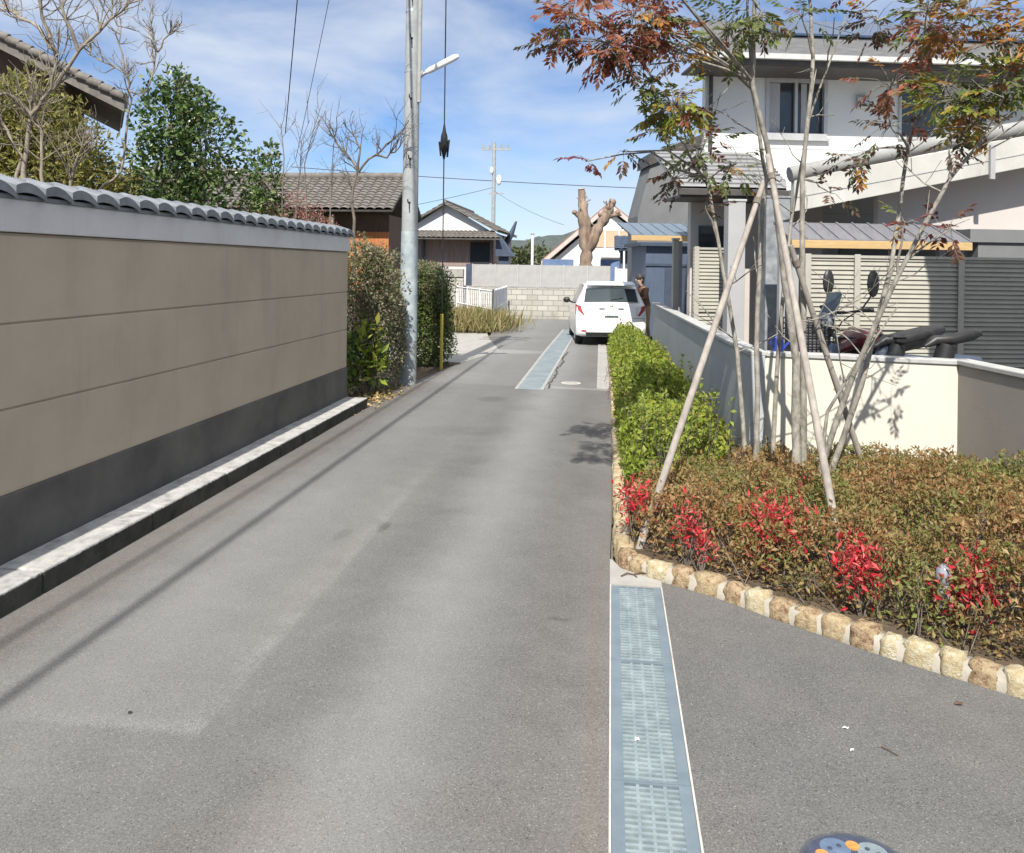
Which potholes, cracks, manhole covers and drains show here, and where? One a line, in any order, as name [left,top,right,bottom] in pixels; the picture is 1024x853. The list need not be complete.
manhole cover [799,832,899,853]
drain grate [609,559,704,853]
crack [548,352,569,388]
